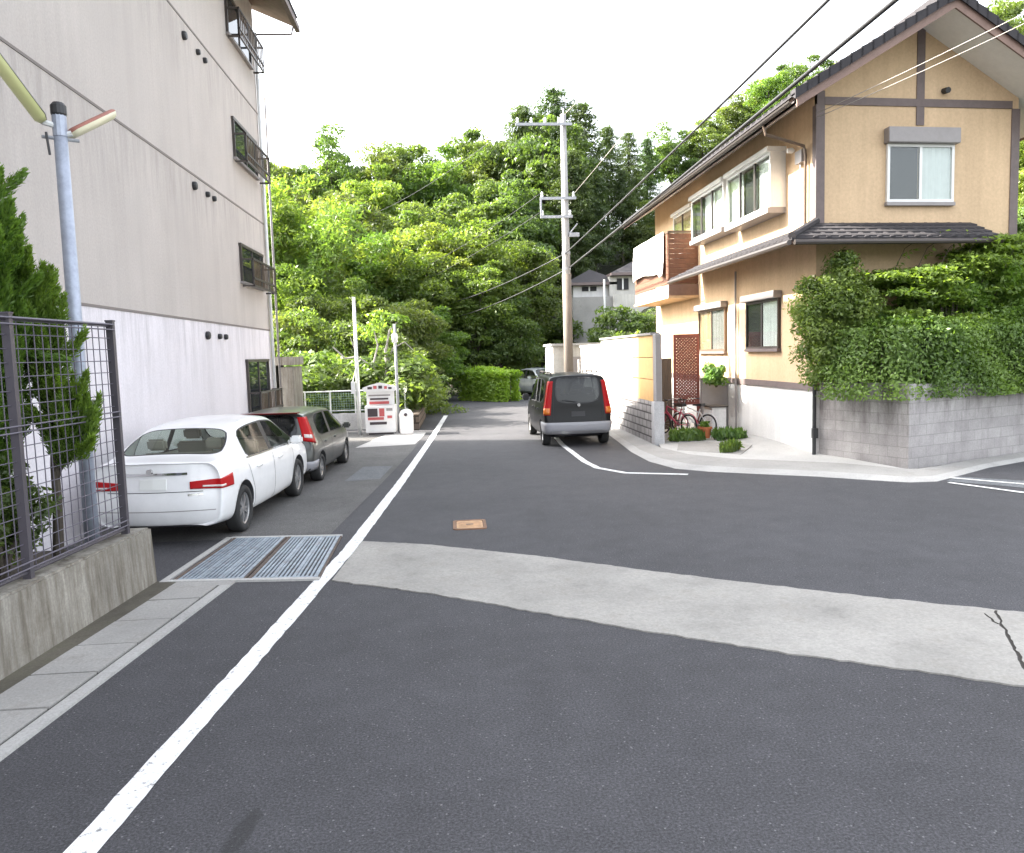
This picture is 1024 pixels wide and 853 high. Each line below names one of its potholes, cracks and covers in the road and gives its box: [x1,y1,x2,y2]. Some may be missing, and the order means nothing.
drain grate [248,535,342,578]
manhole cover [453,519,487,530]
crack [984,610,1024,669]
drain grate [174,537,287,580]
